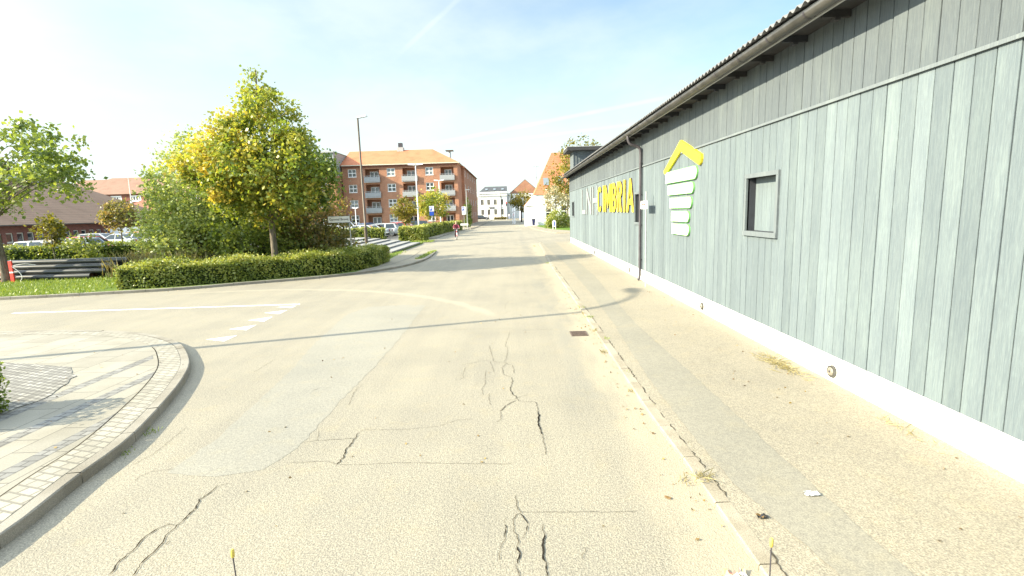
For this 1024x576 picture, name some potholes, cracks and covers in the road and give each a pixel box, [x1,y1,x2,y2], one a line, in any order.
crack [459,301,546,454]
crack [111,482,231,576]
crack [499,495,623,576]
crack [291,419,499,464]
